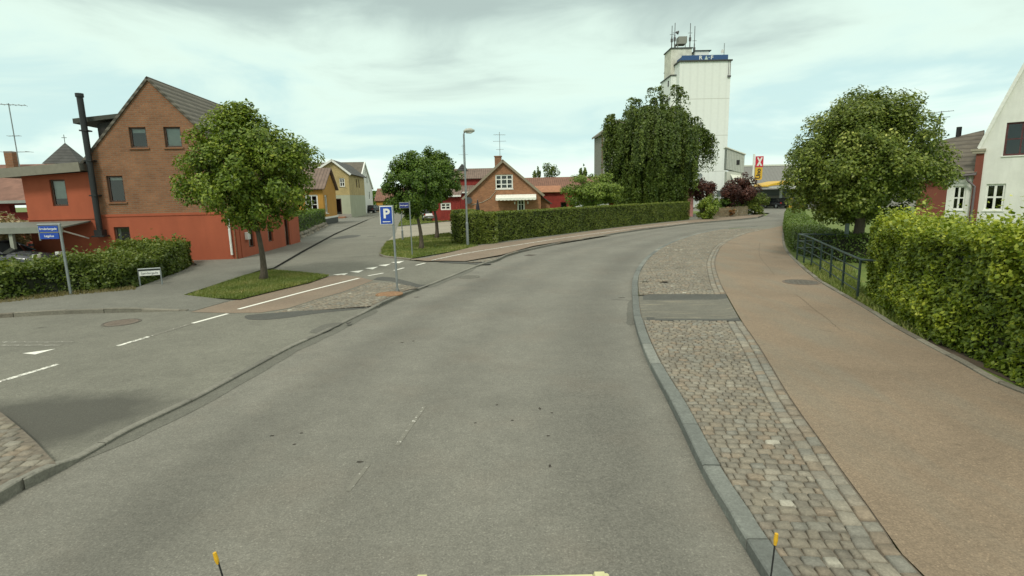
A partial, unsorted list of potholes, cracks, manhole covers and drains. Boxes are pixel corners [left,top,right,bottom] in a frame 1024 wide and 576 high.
manhole cover [101,318,142,327]
